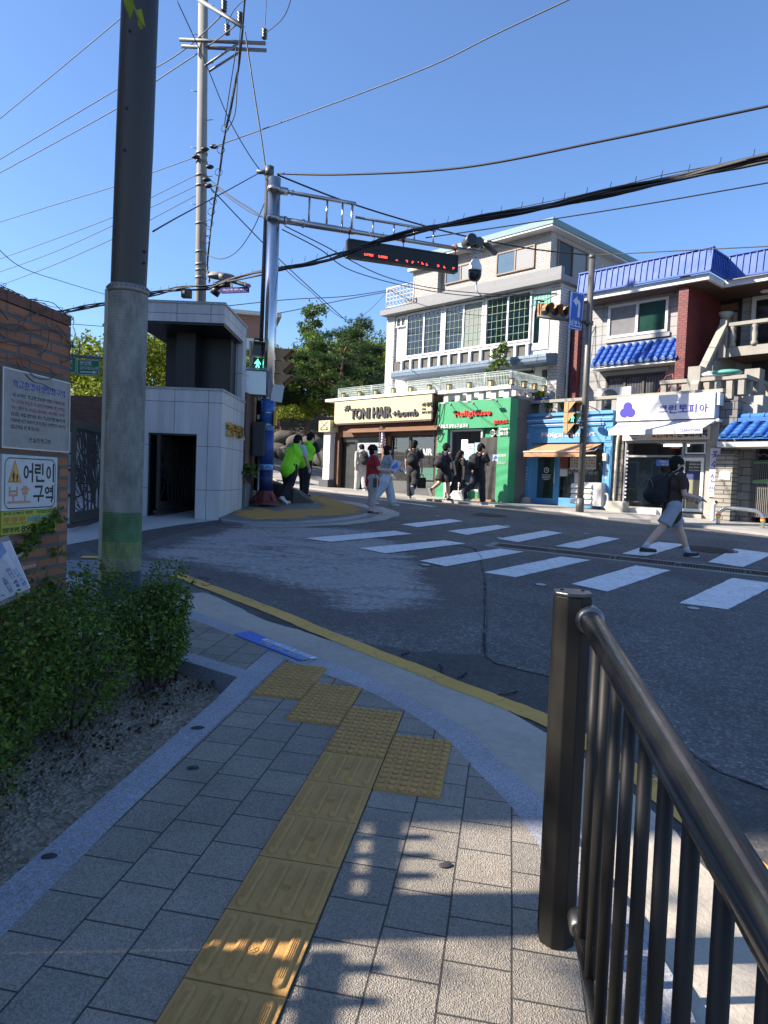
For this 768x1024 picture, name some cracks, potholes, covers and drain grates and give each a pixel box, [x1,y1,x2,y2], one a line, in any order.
crack [438,545,550,678]
